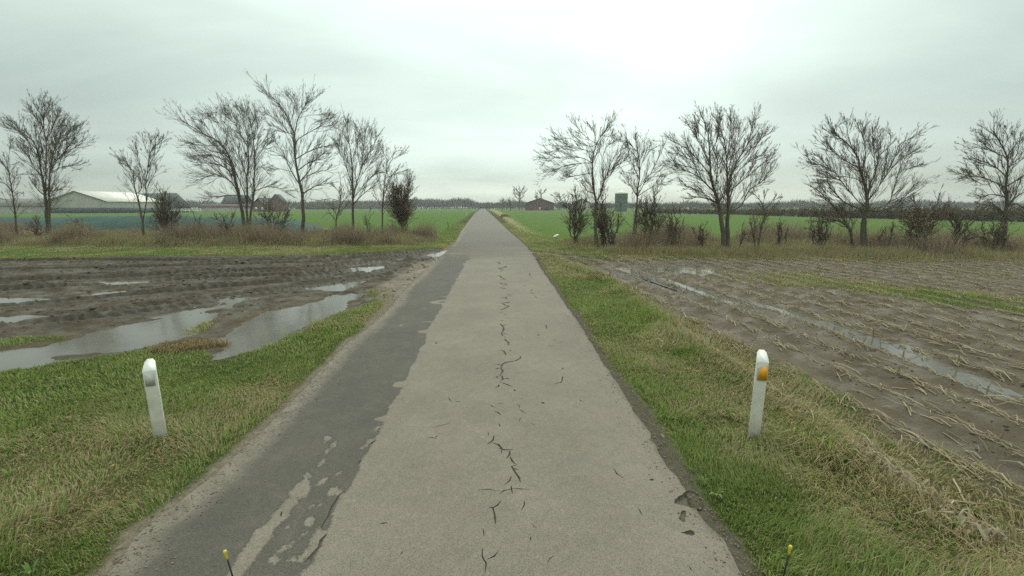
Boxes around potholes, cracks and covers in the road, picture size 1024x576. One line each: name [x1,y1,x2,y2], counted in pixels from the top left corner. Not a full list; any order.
crack [482,262,536,572]
pothole [674,490,703,511]
